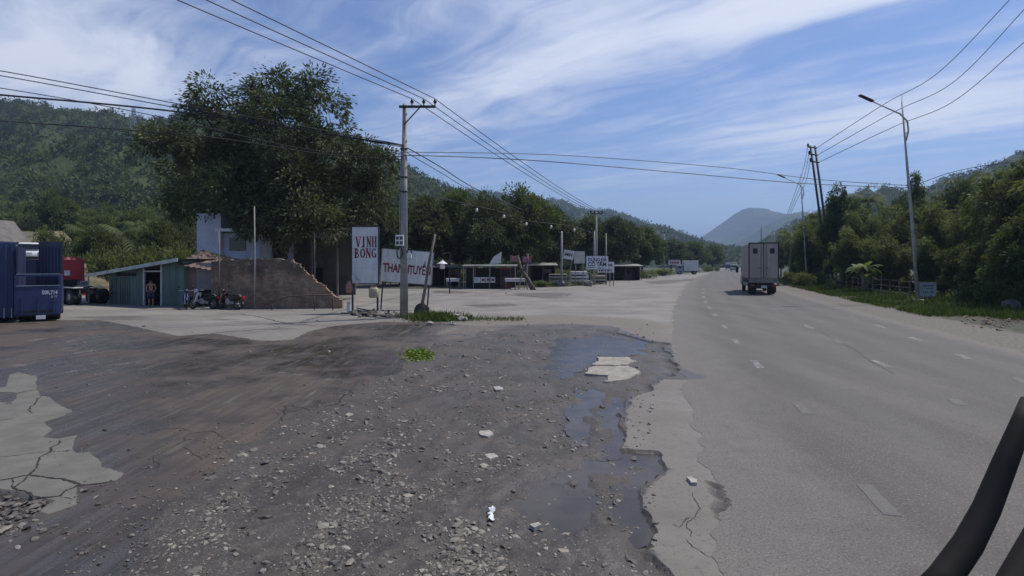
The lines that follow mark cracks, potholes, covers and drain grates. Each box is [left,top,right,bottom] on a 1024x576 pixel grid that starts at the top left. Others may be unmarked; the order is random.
crack [673,494,703,553]
crack [280,389,357,422]
crack [144,428,223,459]
crack [0,440,110,499]
